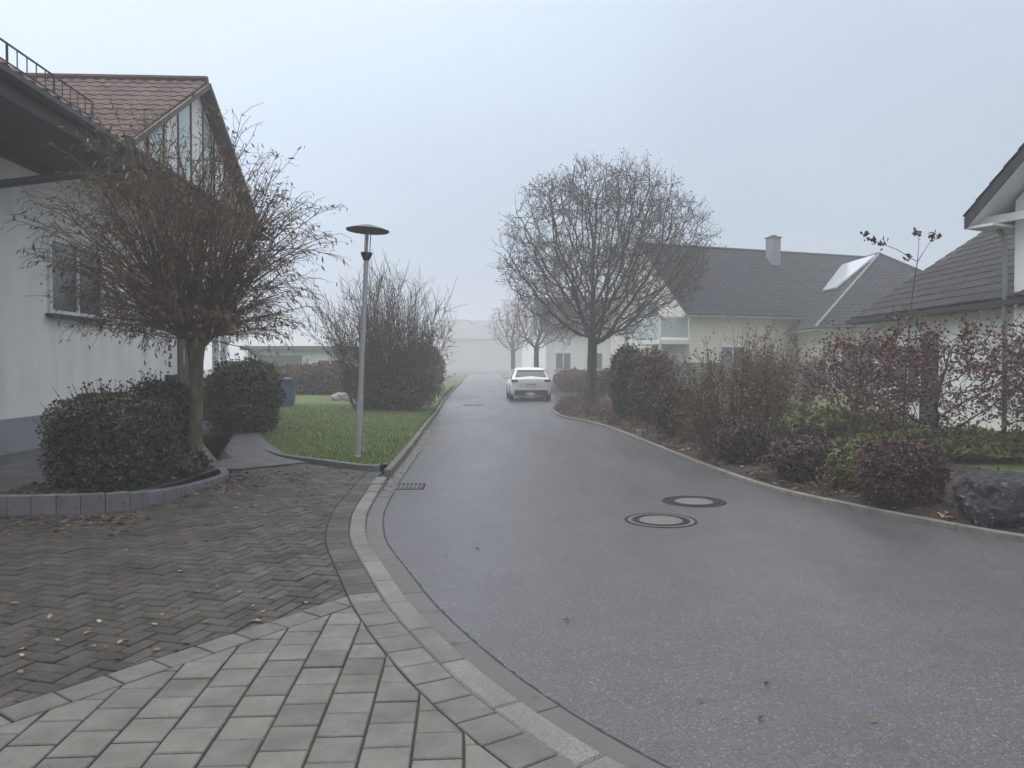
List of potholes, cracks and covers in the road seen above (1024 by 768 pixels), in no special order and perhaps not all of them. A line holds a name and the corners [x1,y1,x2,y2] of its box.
manhole cover [624,513,698,528]
manhole cover [662,496,727,507]
